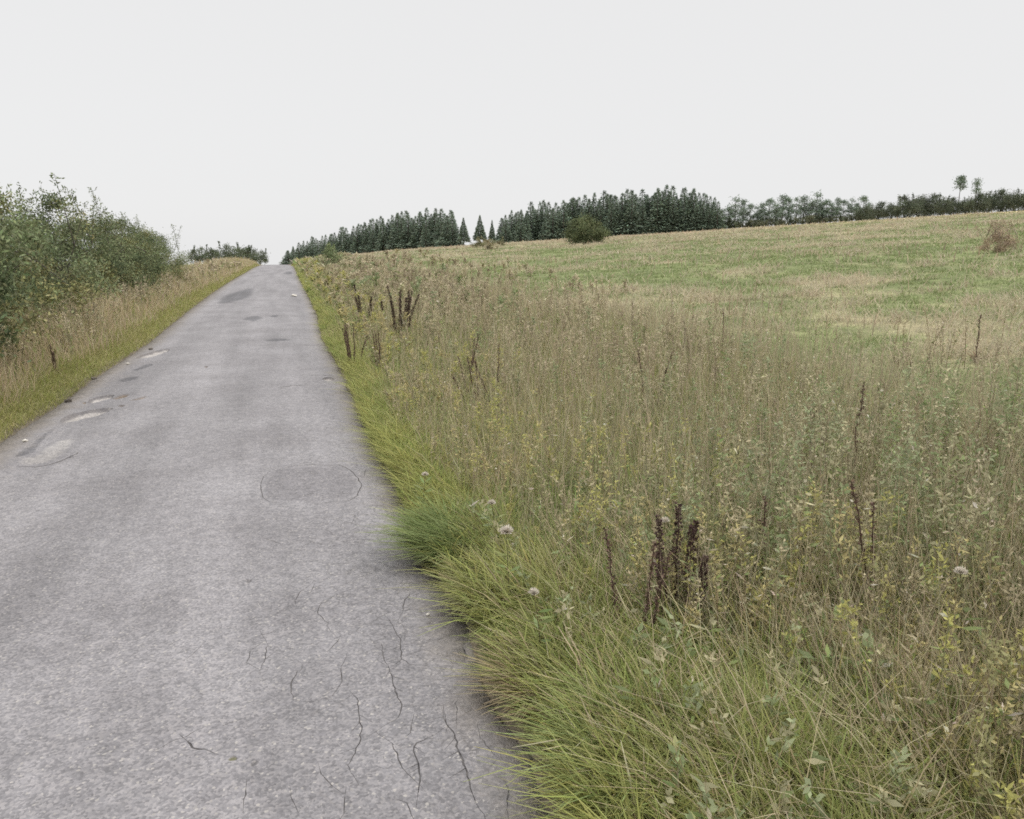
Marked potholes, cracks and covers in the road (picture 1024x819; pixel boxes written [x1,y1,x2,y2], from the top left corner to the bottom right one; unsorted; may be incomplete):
crack [290,581,500,819]
crack [245,632,277,674]
crack [153,716,250,755]
